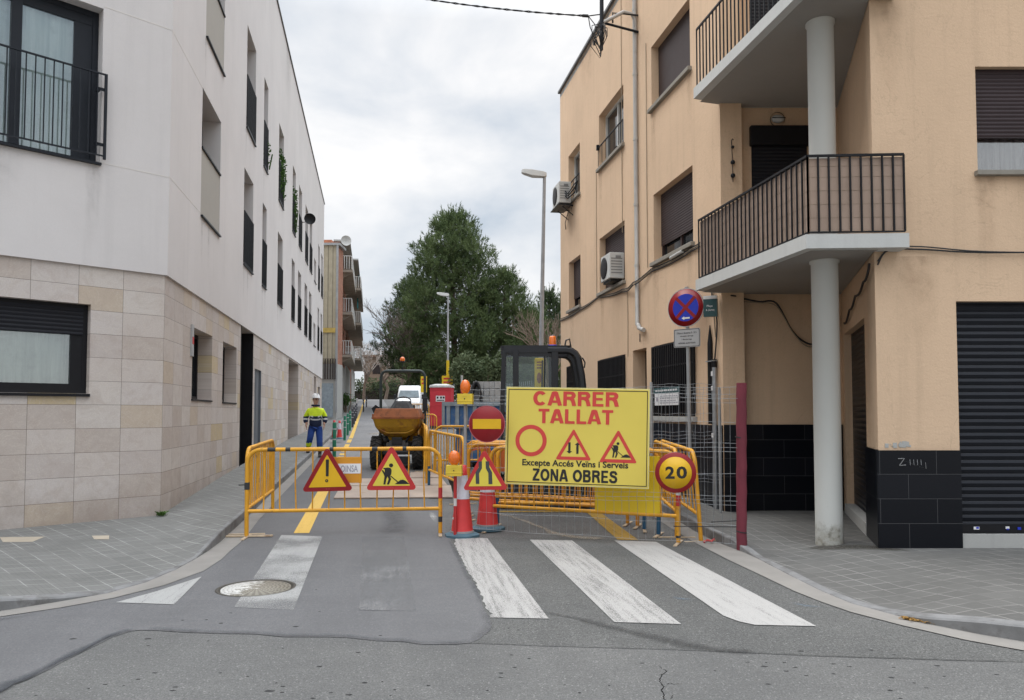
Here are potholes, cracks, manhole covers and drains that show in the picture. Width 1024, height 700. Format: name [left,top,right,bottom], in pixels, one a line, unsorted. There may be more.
crack [659,666,673,700]
manhole cover [215,579,296,597]
